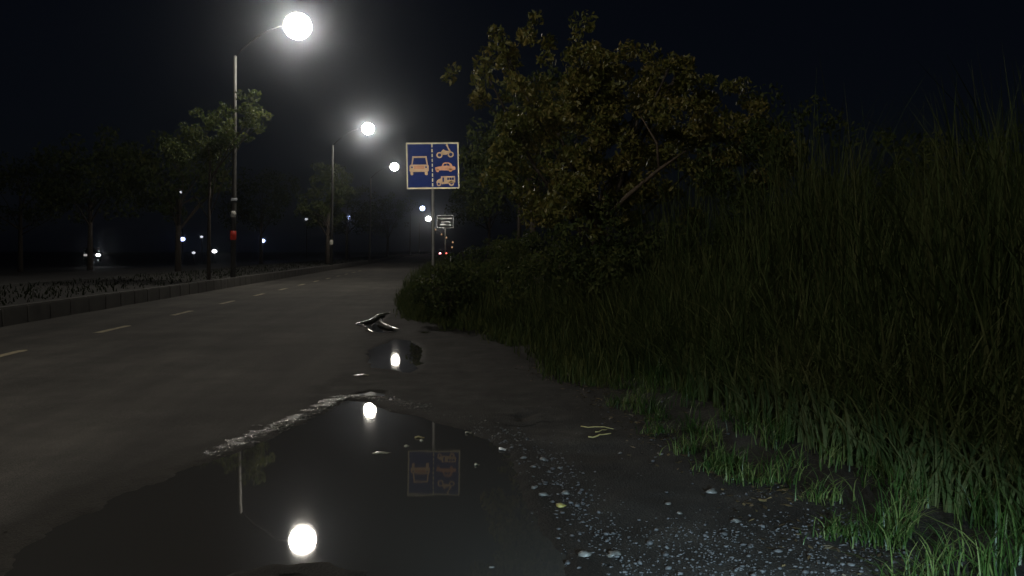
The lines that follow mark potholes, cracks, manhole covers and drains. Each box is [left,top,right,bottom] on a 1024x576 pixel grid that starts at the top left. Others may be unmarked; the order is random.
pothole [349,337,438,376]
pothole [0,394,617,576]
pothole [342,387,403,399]
